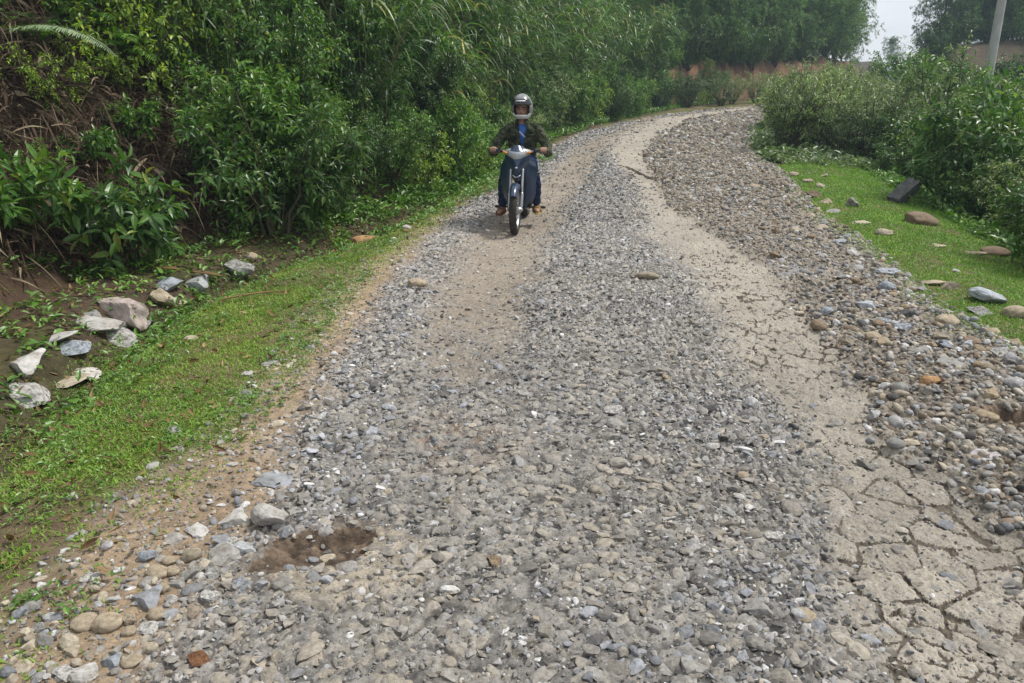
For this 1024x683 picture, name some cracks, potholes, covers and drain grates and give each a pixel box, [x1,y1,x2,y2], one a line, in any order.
pothole [249,526,377,575]
crack [791,420,1024,683]
crack [674,246,841,384]
